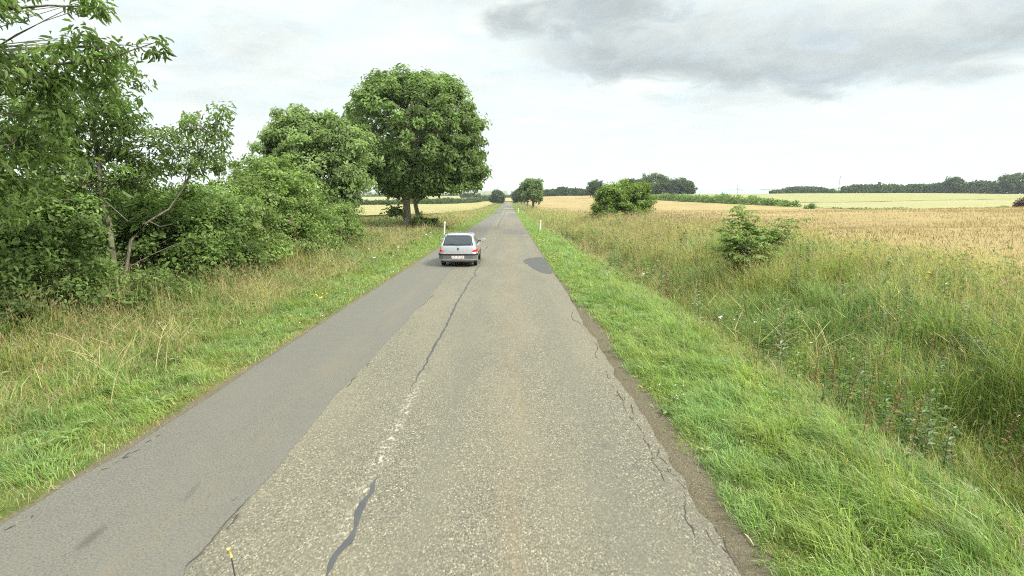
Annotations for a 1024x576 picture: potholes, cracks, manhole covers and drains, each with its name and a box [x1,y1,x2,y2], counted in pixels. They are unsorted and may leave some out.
crack [595,344,745,576]
